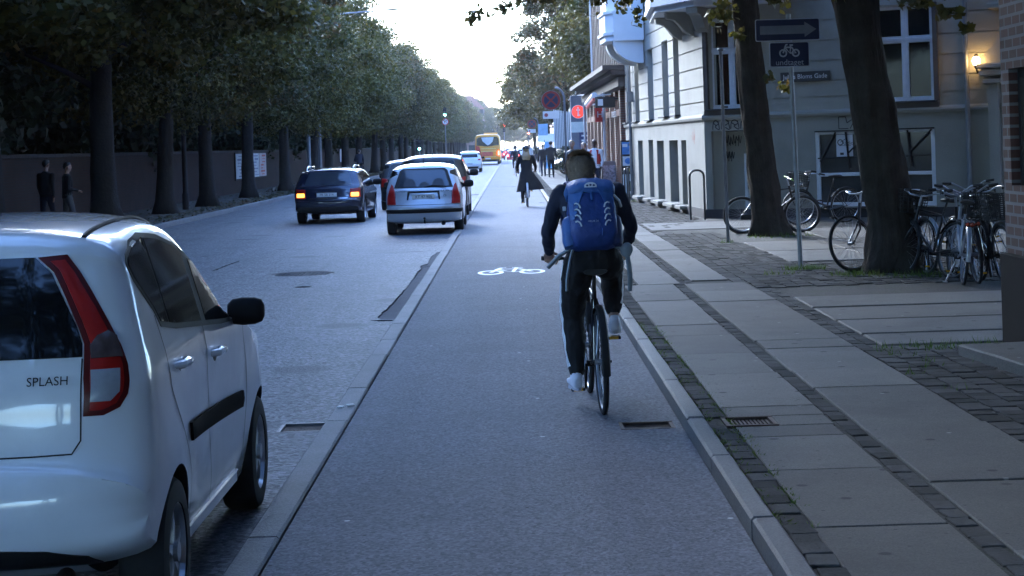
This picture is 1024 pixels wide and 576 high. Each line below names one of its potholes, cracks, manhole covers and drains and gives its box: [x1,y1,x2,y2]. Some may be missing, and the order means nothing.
drain grate [720,416,779,429]
drain grate [275,422,325,433]
drain grate [618,420,676,430]
